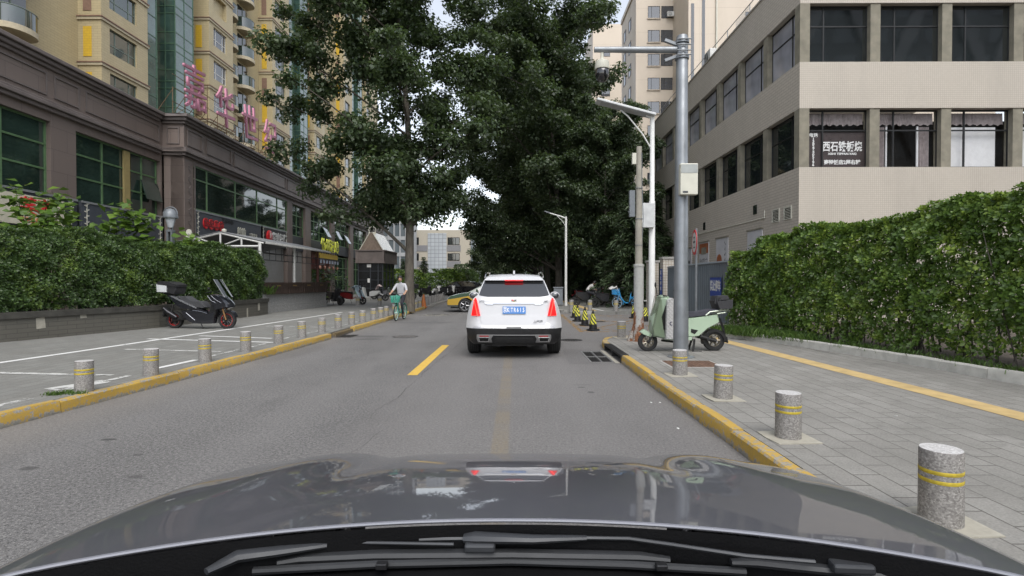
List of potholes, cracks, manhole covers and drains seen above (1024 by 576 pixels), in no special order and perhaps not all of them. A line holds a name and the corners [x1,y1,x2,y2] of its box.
drain grate [581,350,619,363]
